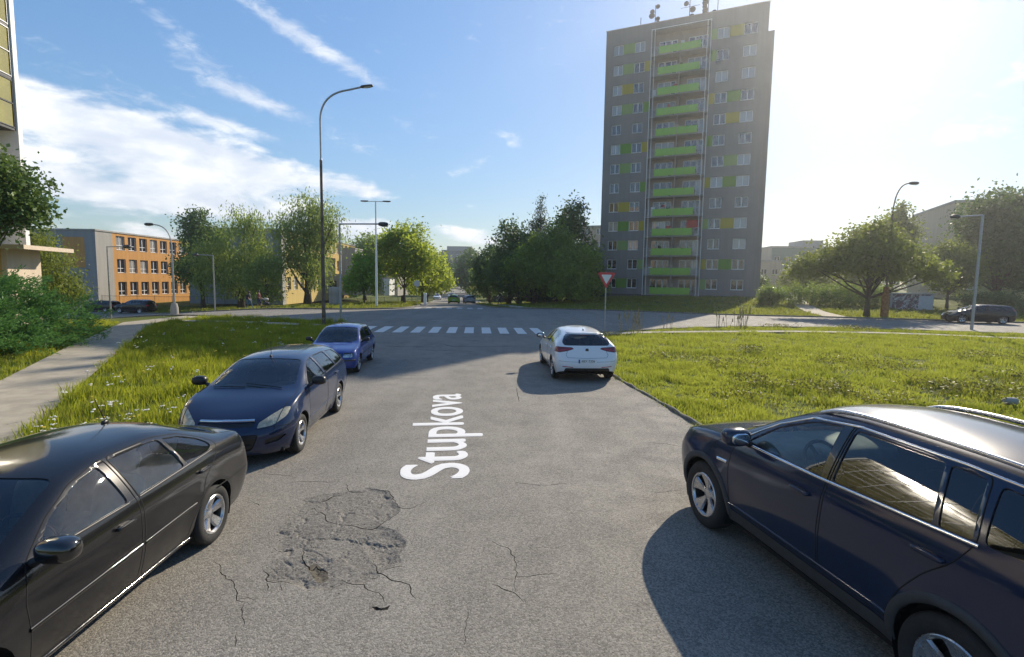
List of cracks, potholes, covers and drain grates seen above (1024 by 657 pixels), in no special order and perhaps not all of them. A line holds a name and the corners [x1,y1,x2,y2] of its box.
crack [213,549,427,646]
crack [492,542,554,601]
pothole [263,488,408,592]
